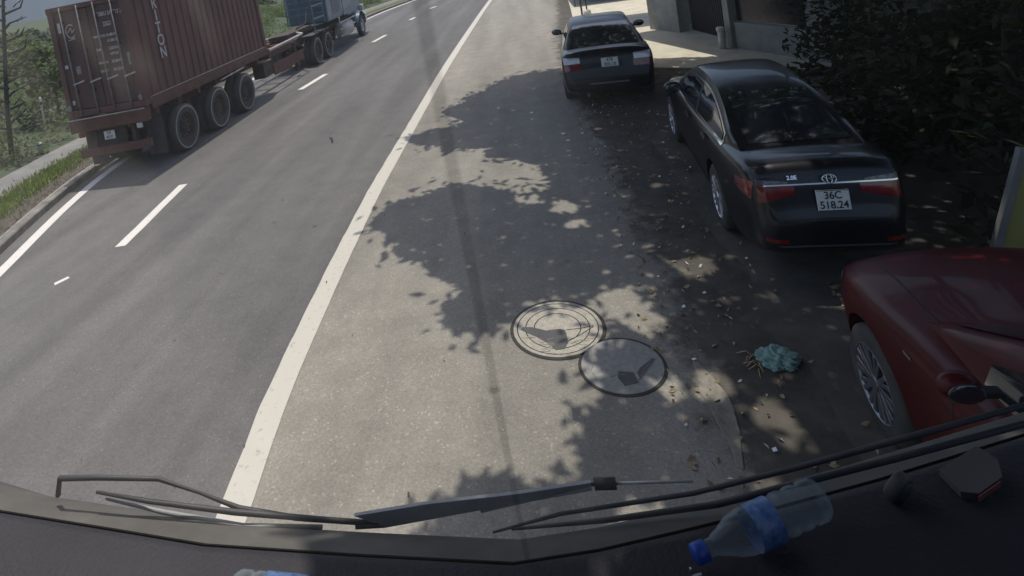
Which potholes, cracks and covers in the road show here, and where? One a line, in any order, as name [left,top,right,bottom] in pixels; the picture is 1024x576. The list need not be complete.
manhole cover [510,300,607,360]
manhole cover [578,338,668,397]
